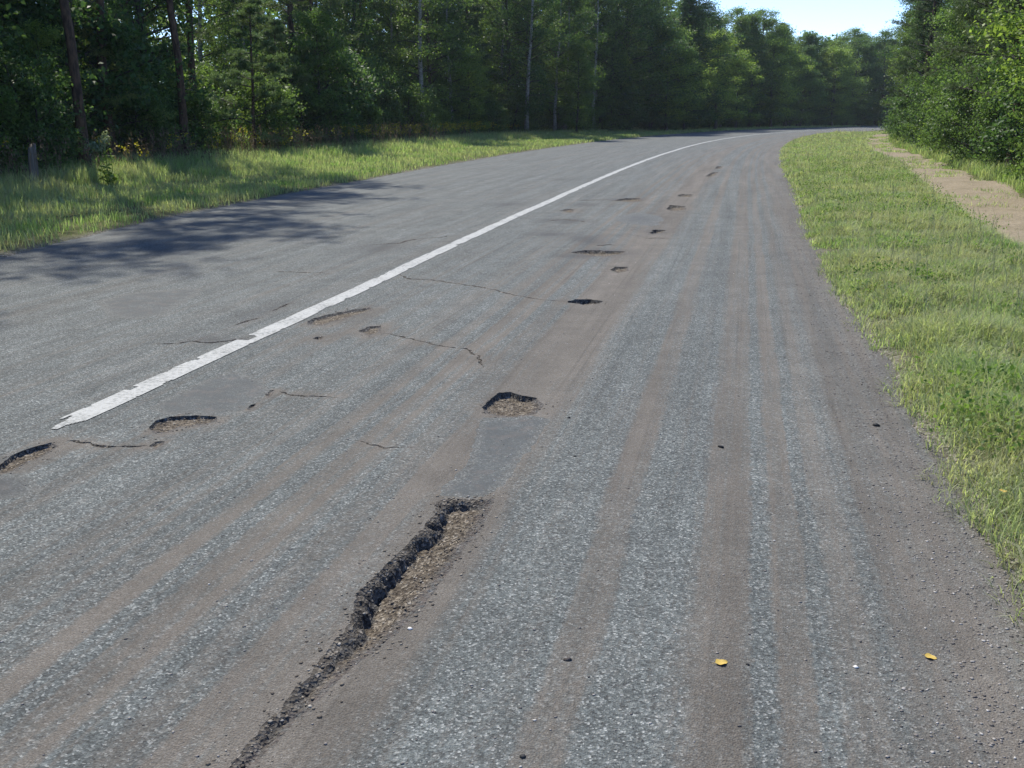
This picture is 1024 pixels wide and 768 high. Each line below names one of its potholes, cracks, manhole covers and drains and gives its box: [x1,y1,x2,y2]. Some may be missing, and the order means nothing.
pothole [230,496,495,768]
pothole [307,307,372,326]
pothole [0,442,58,474]
crack [164,304,288,344]
pothole [358,326,382,336]
pothole [149,415,217,434]
crack [385,333,484,367]
crack [61,440,147,448]
crack [400,274,556,301]
pothole [482,392,544,417]
crack [356,440,416,449]
